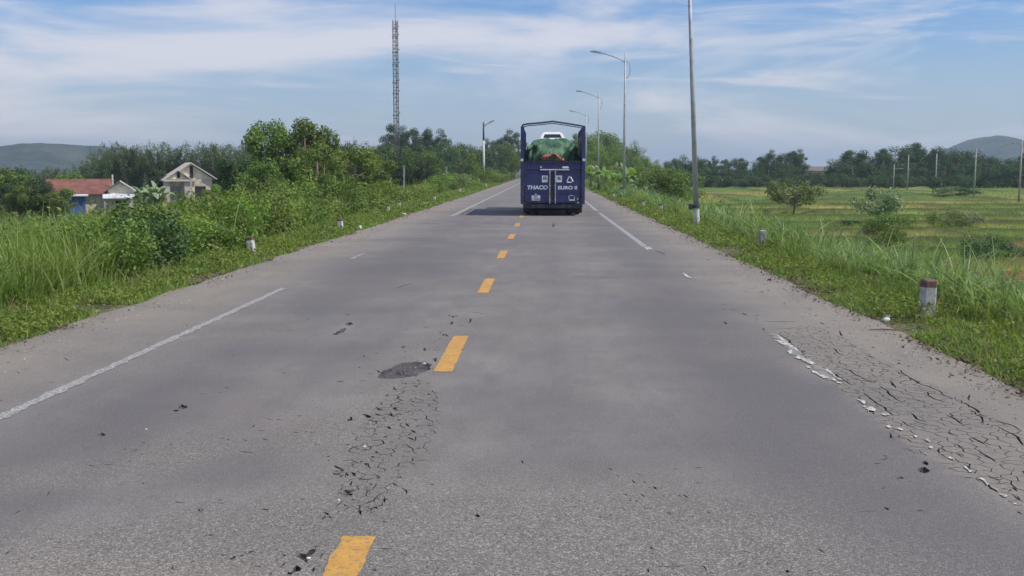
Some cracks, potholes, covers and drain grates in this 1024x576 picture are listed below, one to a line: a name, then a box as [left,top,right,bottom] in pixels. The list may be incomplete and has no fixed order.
crack [724,309,1024,515]
pothole [378,362,431,379]
crack [219,312,475,522]
